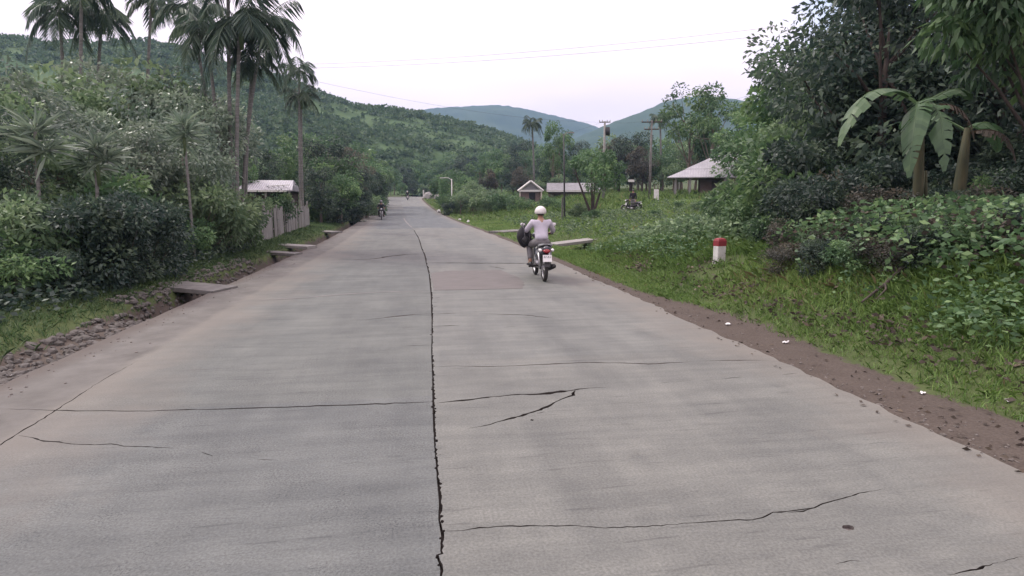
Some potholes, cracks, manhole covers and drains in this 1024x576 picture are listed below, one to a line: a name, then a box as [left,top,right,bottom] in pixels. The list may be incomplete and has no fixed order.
crack [950,558,1015,575]
crack [349,230,742,576]
crack [443,489,881,533]
crack [0,364,212,456]
